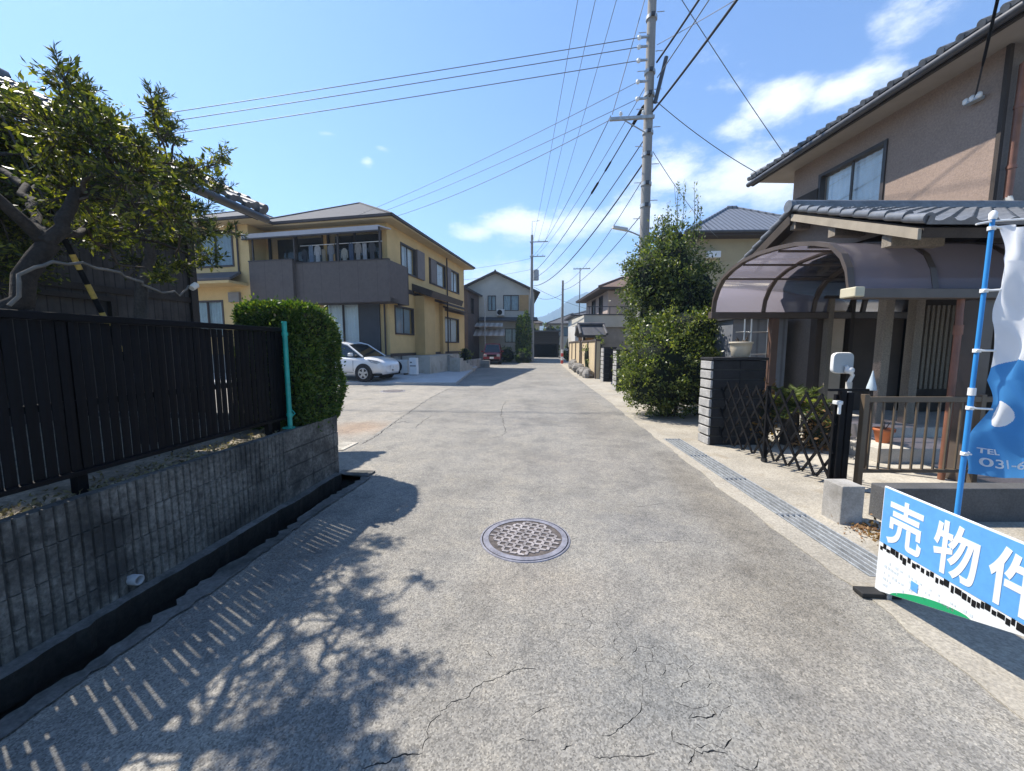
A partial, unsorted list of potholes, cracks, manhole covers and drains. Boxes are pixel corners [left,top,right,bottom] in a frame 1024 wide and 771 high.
crack [564,599,763,771]
drain grate [665,439,707,455]
drain grate [777,514,878,577]
drain grate [723,478,806,515]
manhole cover [480,518,571,563]
crack [362,650,535,769]
drain grate [688,455,745,478]
